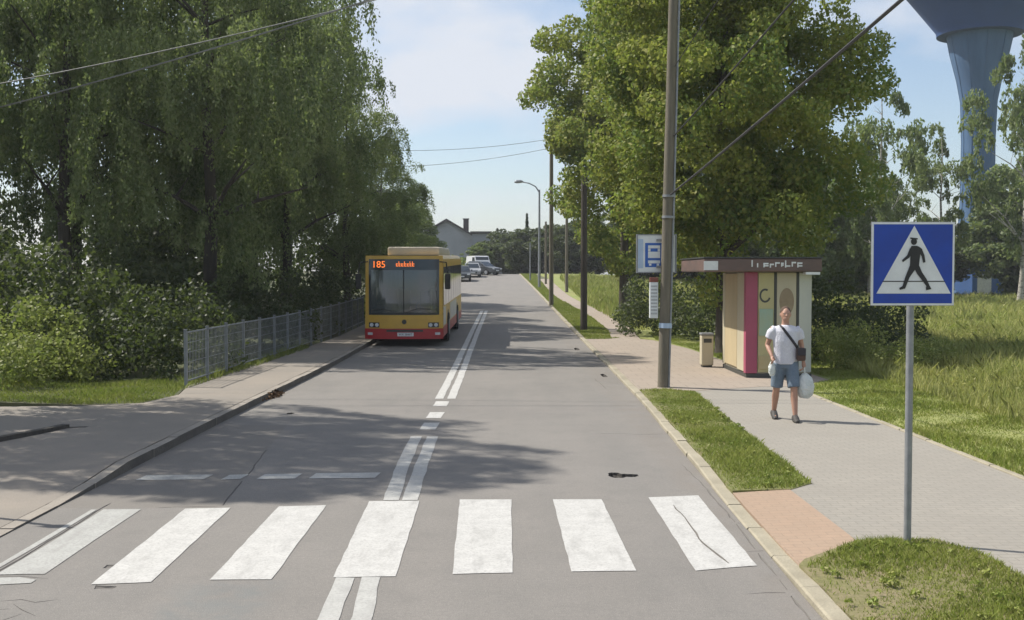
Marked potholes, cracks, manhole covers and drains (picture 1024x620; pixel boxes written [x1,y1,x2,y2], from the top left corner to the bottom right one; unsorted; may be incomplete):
crack [0,599,51,620]
crack [674,506,728,563]
